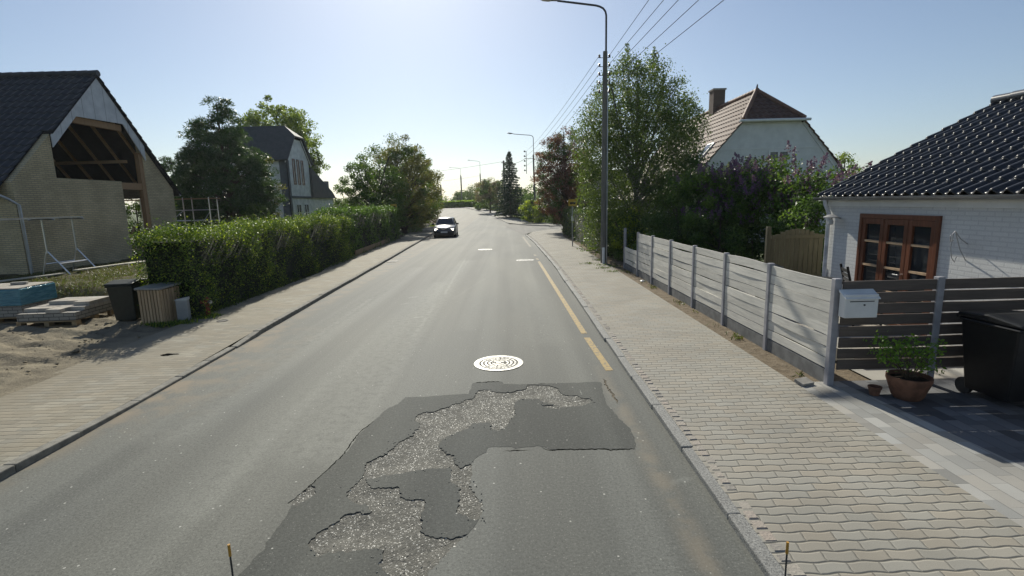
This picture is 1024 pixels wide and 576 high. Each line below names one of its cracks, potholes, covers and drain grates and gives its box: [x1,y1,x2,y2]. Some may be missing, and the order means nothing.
pothole [308,385,592,576]
pothole [288,486,316,506]
manhole cover [474,355,523,371]
